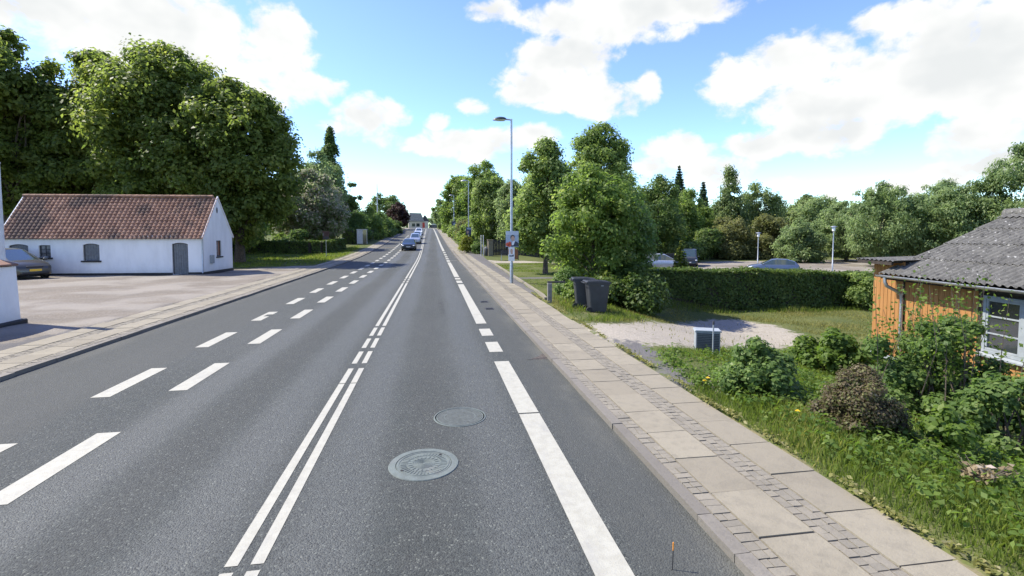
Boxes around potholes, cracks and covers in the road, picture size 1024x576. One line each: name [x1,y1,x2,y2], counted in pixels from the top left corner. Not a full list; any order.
manhole cover [434,407,486,427]
manhole cover [388,449,459,481]
